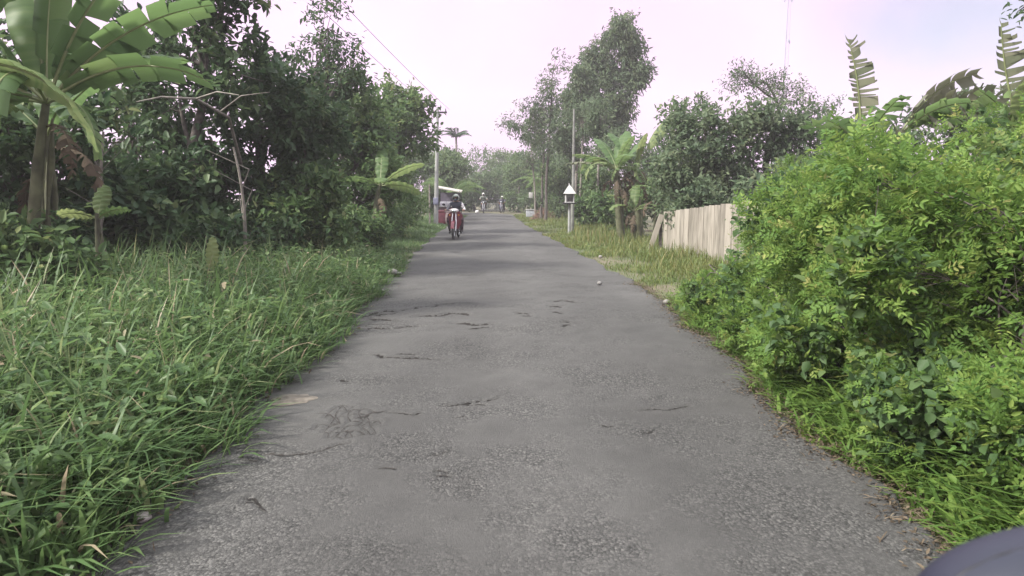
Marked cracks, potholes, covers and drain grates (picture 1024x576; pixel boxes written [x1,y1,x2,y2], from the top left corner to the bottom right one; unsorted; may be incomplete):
crack [248,405,420,461]
crack [449,398,498,417]
crack [363,303,494,330]
